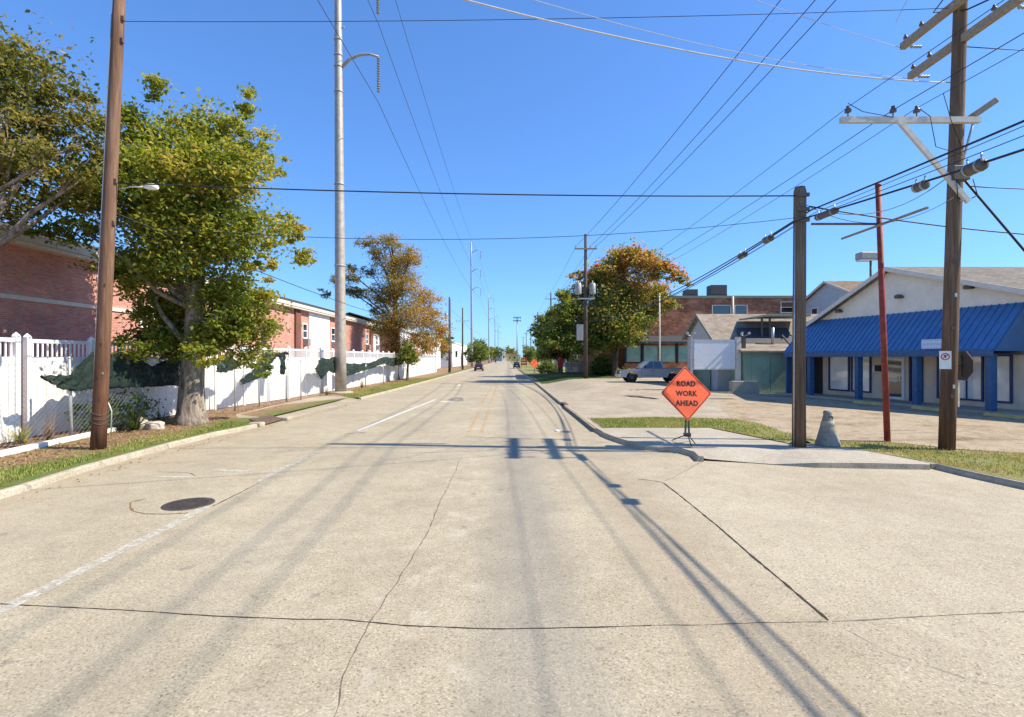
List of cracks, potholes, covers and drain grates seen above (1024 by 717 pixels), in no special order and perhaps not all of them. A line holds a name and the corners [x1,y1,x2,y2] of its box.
drain grate [248,415,293,427]
manhole cover [161,497,215,511]
crack [1,465,652,717]
